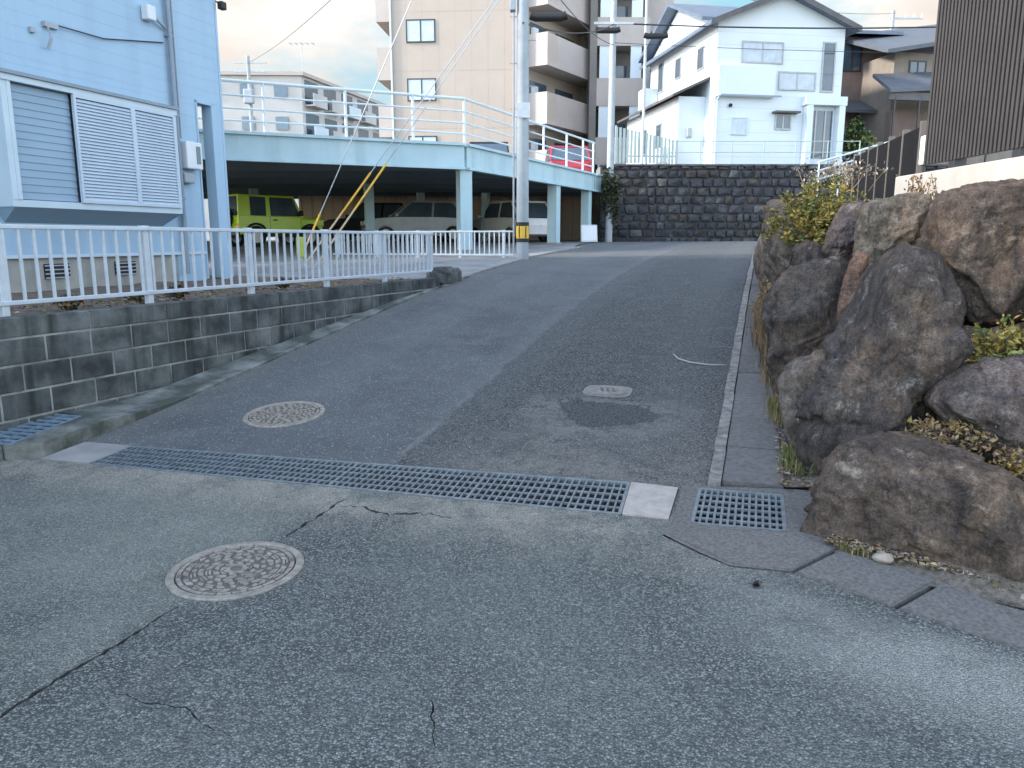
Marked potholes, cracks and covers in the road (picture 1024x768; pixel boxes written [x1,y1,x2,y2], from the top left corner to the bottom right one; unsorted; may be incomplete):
manhole cover [243,401,325,428]
drain grate [690,488,787,532]
manhole cover [165,541,304,601]
crack [282,499,452,540]
utility cover [583,385,633,398]
crack [0,605,228,735]
drain grate [90,446,630,515]
drain grate [0,414,81,460]
